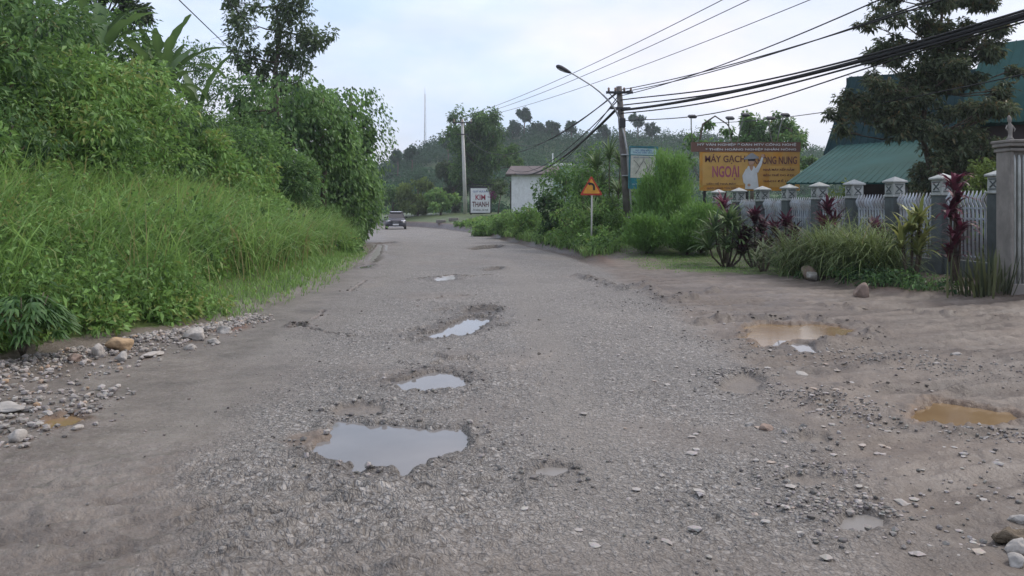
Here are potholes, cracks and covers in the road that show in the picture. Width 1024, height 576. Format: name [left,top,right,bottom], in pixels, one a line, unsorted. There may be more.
pothole [707,369,775,397]
pothole [732,319,861,349]
pothole [405,314,504,342]
pothole [895,393,1024,428]
pothole [26,410,99,431]
crack [292,309,359,337]
pothole [819,503,903,536]
pothole [425,274,466,282]
pothole [286,416,487,481]
pothole [367,364,489,396]
